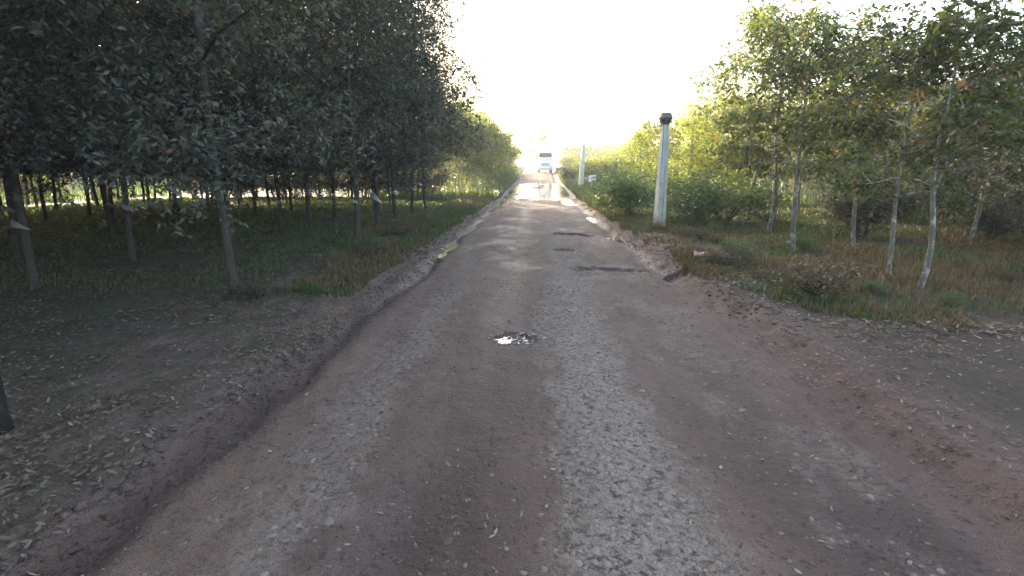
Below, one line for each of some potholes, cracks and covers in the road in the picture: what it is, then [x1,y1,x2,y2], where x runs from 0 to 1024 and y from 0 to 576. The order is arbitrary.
pothole [565,266,658,276]
pothole [485,331,544,346]
